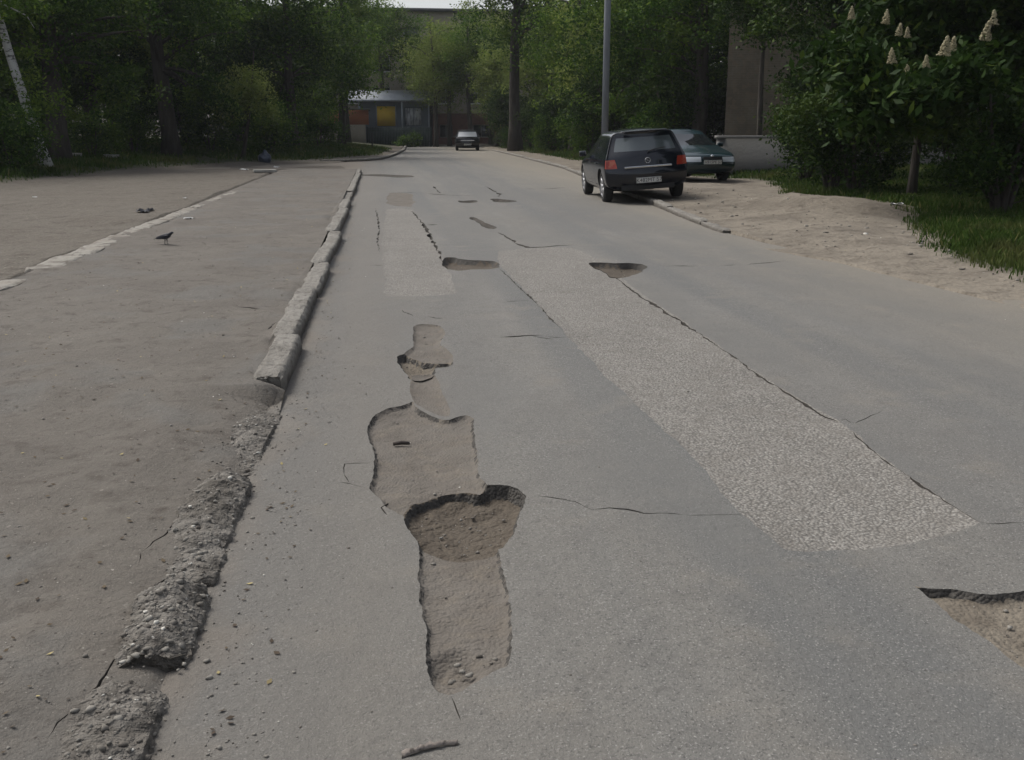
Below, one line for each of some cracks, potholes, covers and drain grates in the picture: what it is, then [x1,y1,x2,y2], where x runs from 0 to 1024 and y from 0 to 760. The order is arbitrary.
pothole [410,374,450,416]
crack [531,495,739,516]
pothole [915,586,1024,668]
pothole [442,257,500,271]
pothole [589,262,647,278]
crack [413,212,444,264]
pothole [404,485,526,563]
pothole [397,354,453,382]
crack [498,270,568,339]
pothole [404,324,454,364]
crack [616,278,1012,524]
pothole [417,543,513,695]
